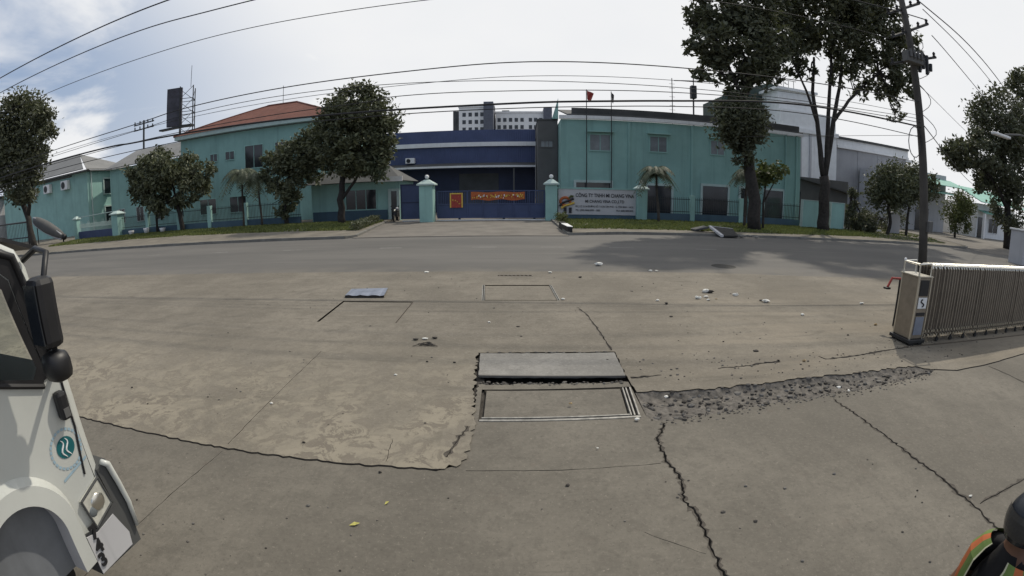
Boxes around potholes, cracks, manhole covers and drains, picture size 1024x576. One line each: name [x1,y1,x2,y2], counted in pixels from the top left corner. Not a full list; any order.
crack [579,309,612,350]
crack [645,422,729,576]
manhole cover [478,387,641,422]
manhole cover [482,285,560,301]
pothole [636,367,937,425]
crack [443,356,485,457]
crack [834,399,1024,528]
manhole cover [478,351,625,378]
